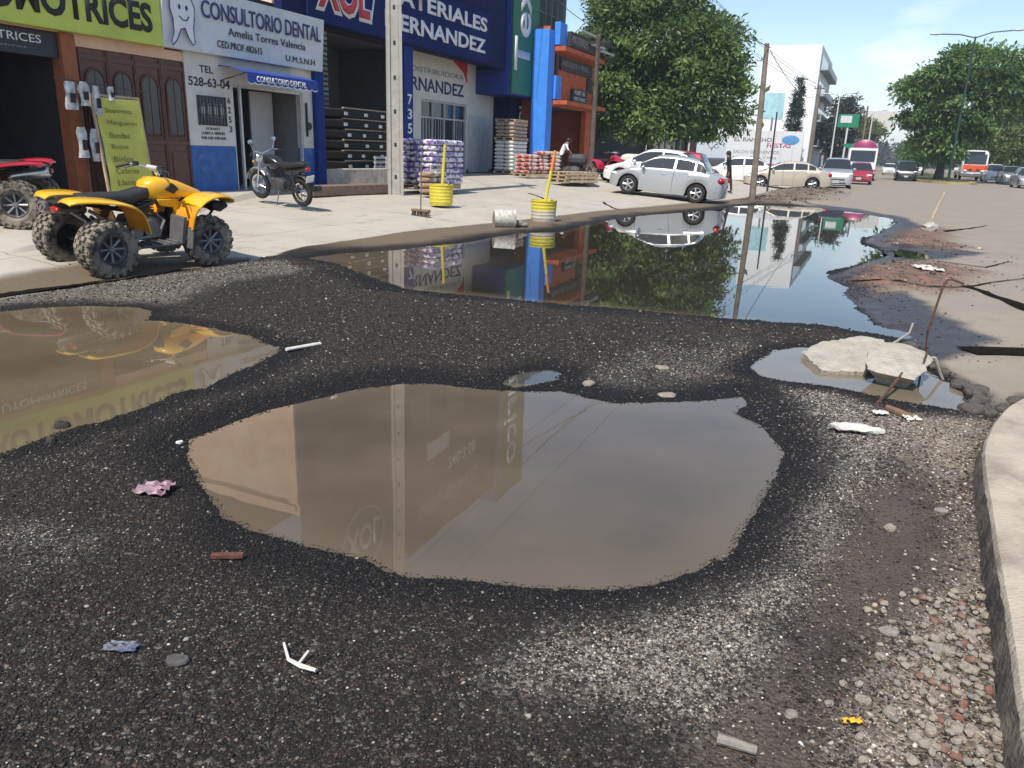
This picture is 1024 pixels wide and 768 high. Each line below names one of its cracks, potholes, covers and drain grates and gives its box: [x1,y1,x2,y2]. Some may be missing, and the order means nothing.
pothole [0,303,287,456]
pothole [742,345,972,412]
pothole [305,204,920,339]
pothole [173,380,797,600]
crack [850,261,1024,310]
pothole [882,248,941,260]
